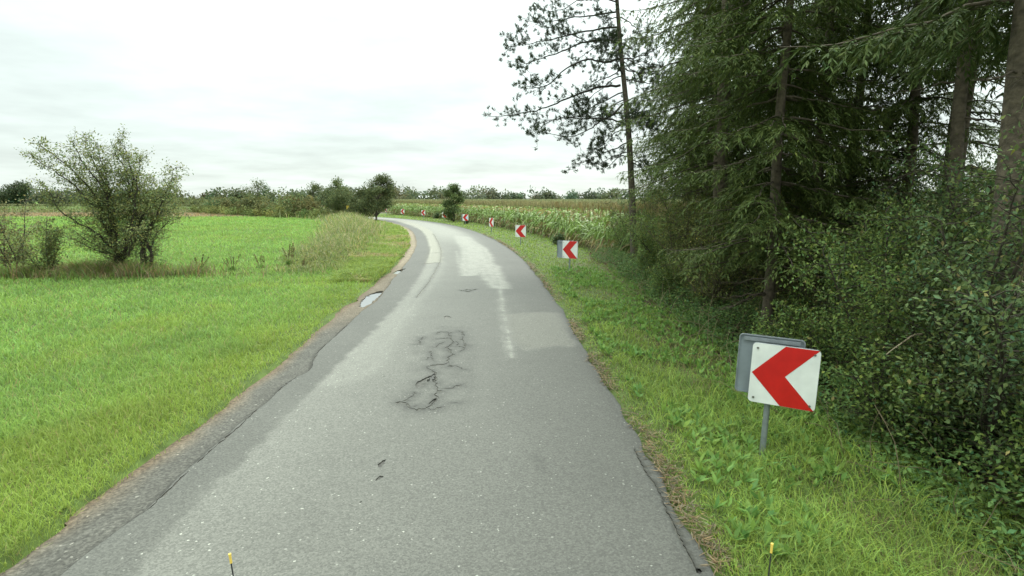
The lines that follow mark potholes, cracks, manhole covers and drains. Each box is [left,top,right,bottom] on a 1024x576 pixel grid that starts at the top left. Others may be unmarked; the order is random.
pothole [359,291,383,307]
crack [396,331,467,411]
